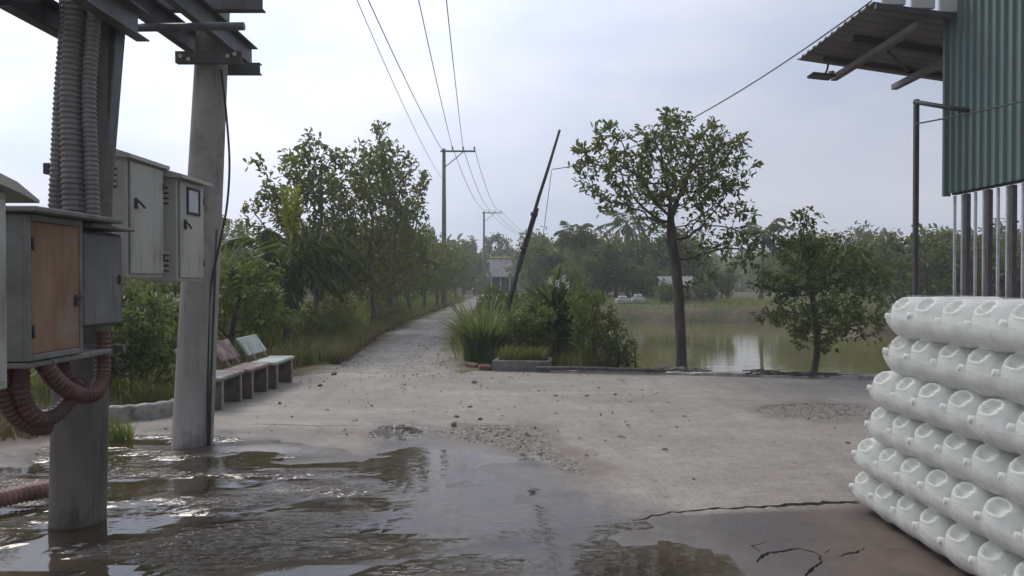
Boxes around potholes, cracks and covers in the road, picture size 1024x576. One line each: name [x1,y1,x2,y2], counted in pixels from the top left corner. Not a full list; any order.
crack [633,500,860,521]
pothole [753,403,874,421]
crack [699,542,864,576]
pothole [367,424,429,442]
